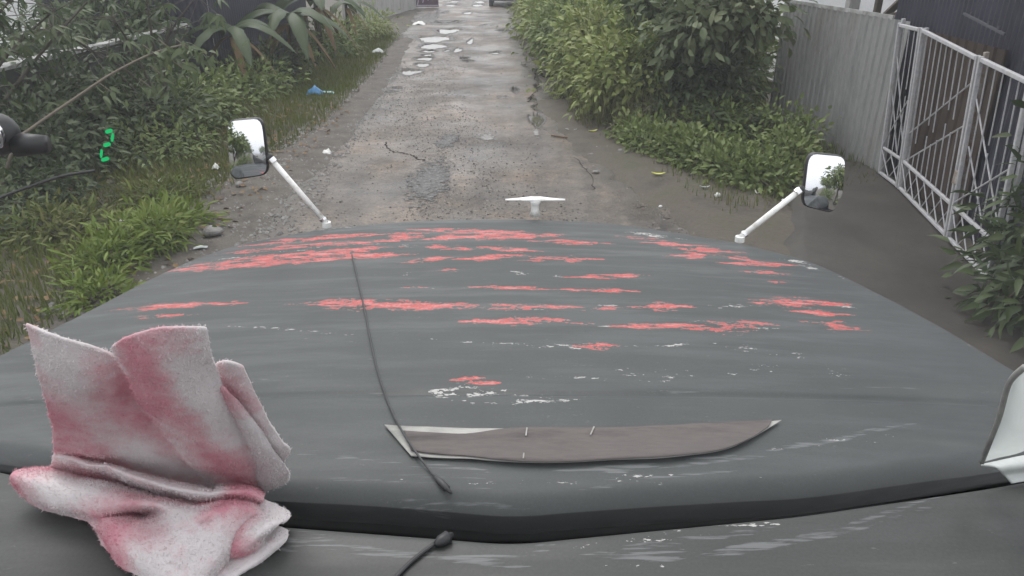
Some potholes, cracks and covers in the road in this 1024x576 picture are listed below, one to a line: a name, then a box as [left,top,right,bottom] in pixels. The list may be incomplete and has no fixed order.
pothole [398,68,425,76]
pothole [411,34,457,44]
pothole [432,27,466,35]
pothole [413,41,455,50]
